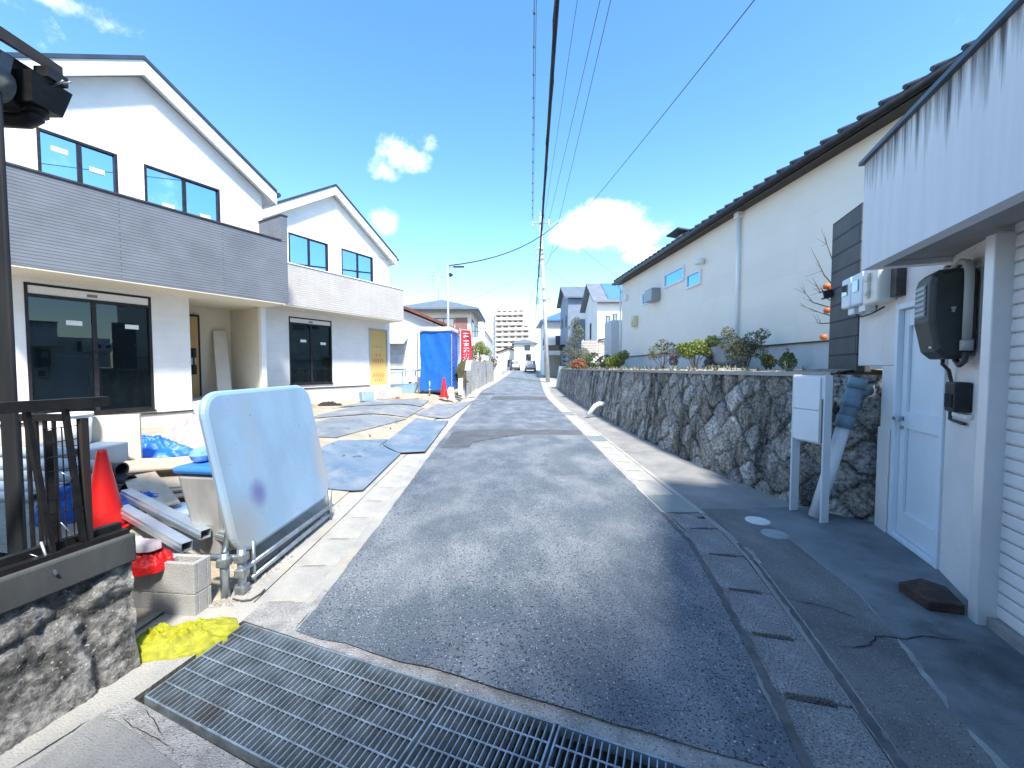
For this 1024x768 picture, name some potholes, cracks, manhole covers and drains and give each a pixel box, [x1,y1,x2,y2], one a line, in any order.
crack [121,708,173,749]
manhole cover [745,516,771,525]
drain grate [545,724,691,768]
crack [790,599,957,647]
drain grate [144,623,449,768]
drain grate [400,689,556,768]
manhole cover [760,529,789,539]
